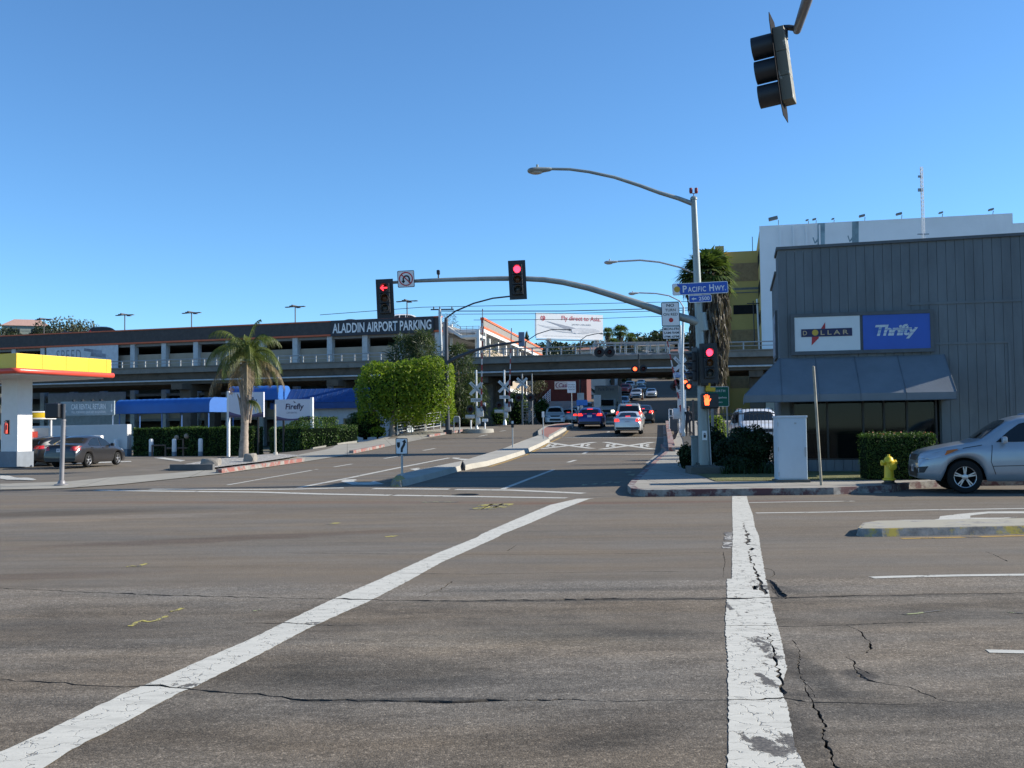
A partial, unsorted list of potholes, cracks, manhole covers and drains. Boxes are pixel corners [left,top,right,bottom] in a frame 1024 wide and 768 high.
crack [743,525,775,595]
crack [3,622,985,768]
